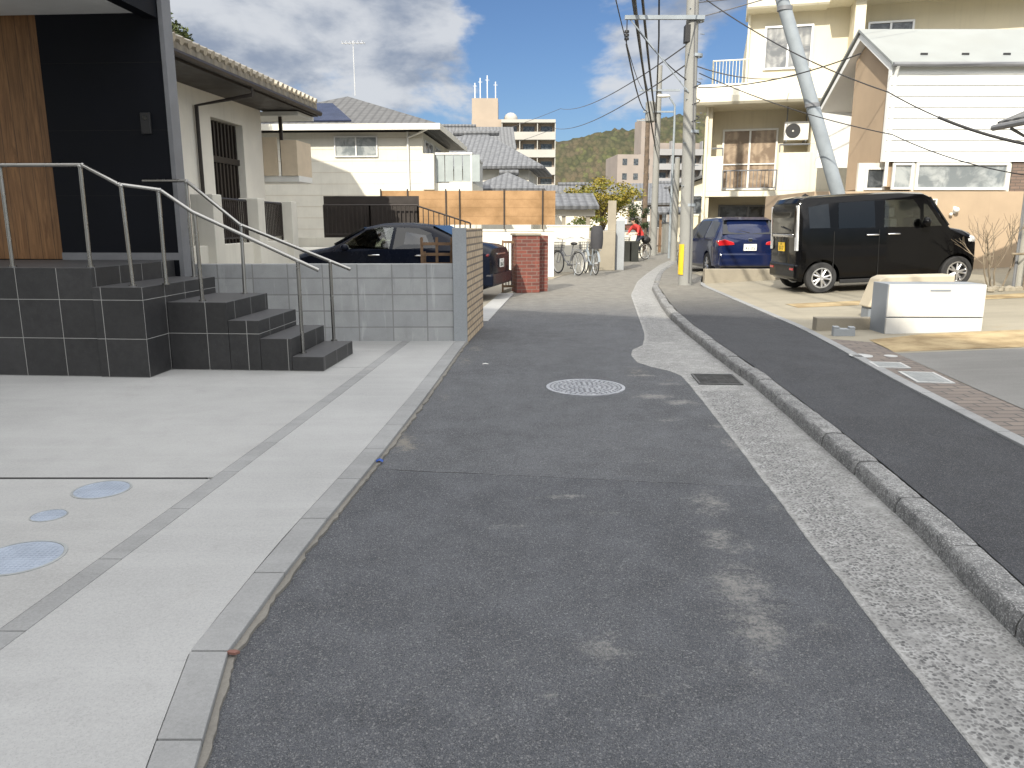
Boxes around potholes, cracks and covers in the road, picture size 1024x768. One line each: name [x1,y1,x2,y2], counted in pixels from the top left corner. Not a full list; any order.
manhole cover [546,379,625,396]
manhole cover [29,509,69,522]
manhole cover [70,480,132,499]
manhole cover [0,540,68,576]
manhole cover [898,371,956,384]
manhole cover [868,361,911,369]
drain grate [691,373,744,385]
